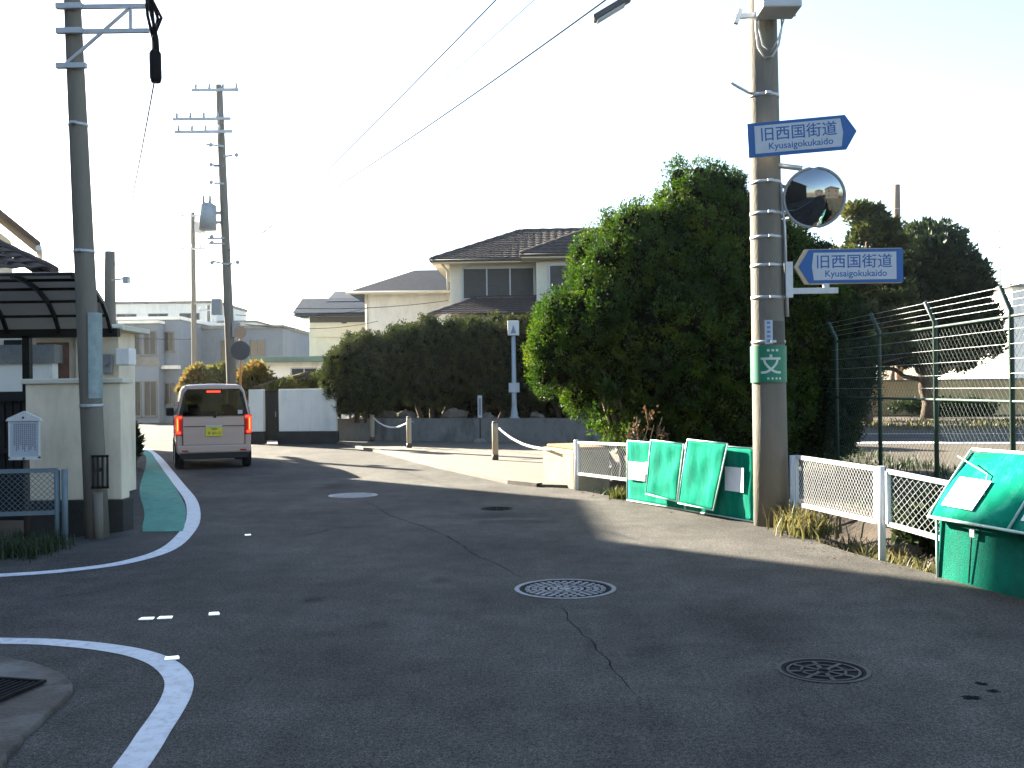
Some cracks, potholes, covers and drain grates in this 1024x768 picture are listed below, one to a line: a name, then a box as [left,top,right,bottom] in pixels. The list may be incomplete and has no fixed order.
crack [562,608,643,700]
drain grate [0,676,47,701]
manhole cover [777,658,871,684]
manhole cover [515,579,616,599]
